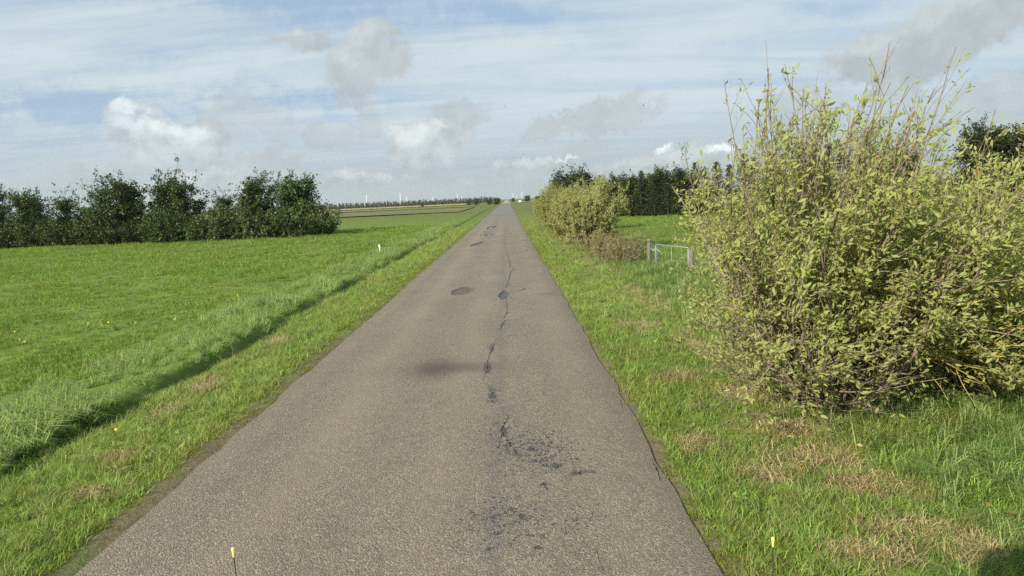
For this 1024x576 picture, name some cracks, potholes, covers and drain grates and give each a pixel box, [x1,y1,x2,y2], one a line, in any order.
crack [479,223,614,491]
